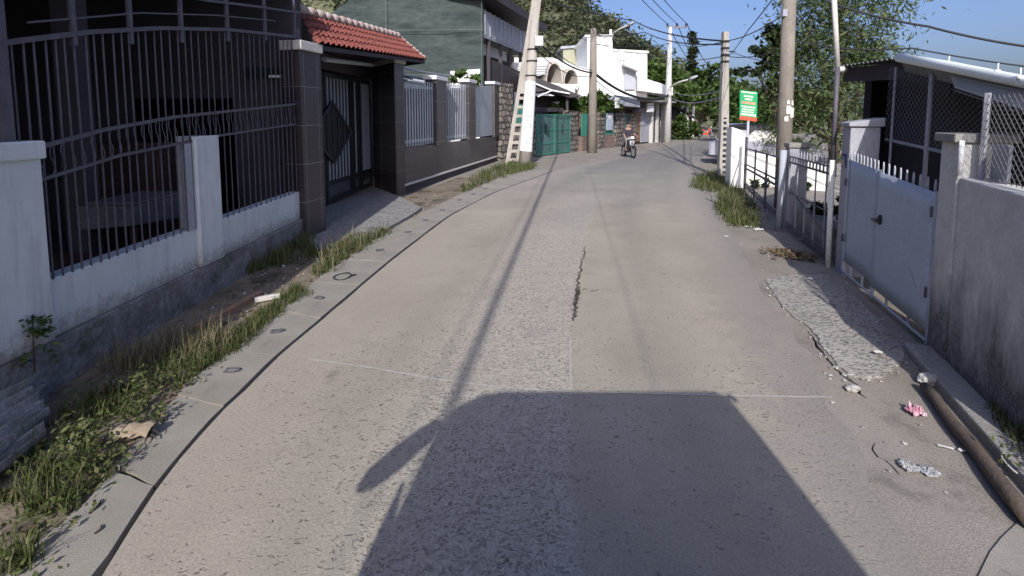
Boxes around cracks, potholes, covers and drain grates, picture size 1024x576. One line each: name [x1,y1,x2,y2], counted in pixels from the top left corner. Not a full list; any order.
crack [572,246,599,322]
crack [808,332,866,398]
